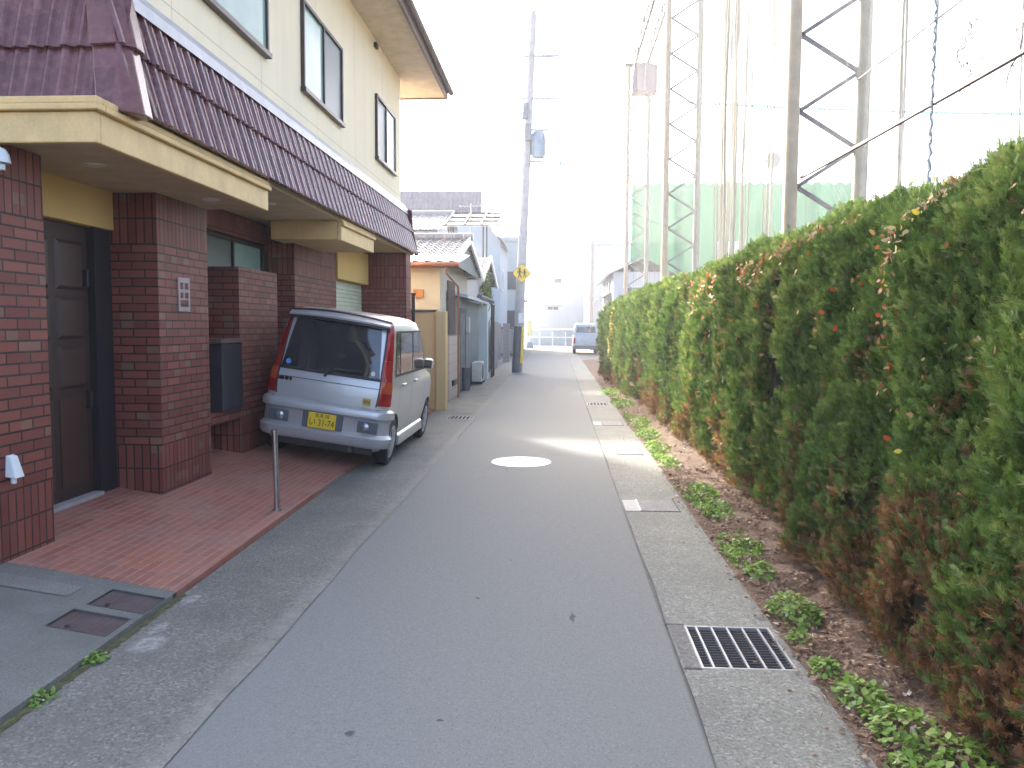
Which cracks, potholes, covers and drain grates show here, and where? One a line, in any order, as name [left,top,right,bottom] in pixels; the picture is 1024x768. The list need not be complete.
drain grate [665,623,798,740]
